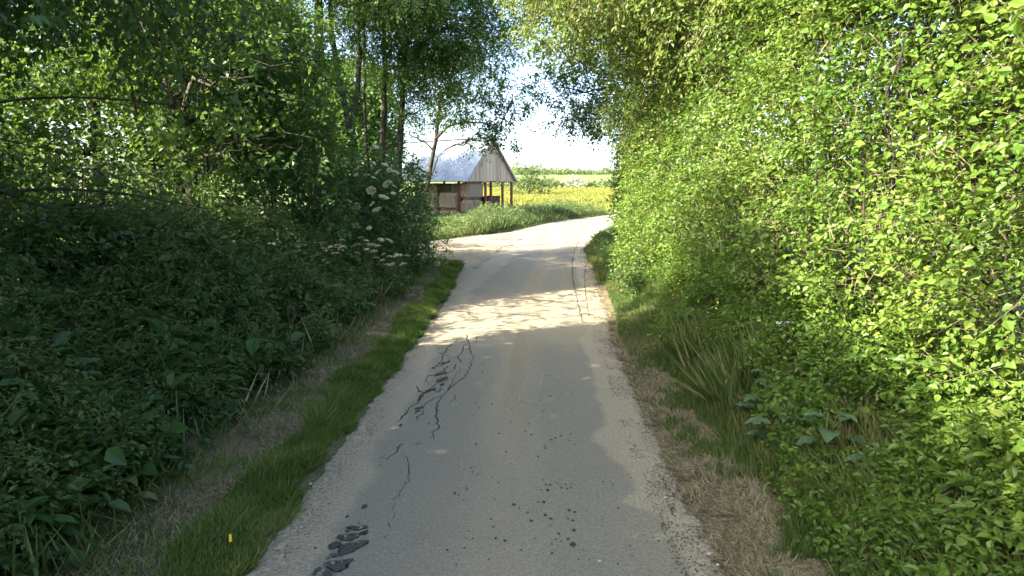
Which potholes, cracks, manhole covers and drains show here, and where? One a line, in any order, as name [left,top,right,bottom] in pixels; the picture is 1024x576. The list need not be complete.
crack [384,334,477,539]
crack [571,242,590,322]
pothole [340,529,368,541]
pothole [338,539,369,556]
pothole [323,558,353,573]
